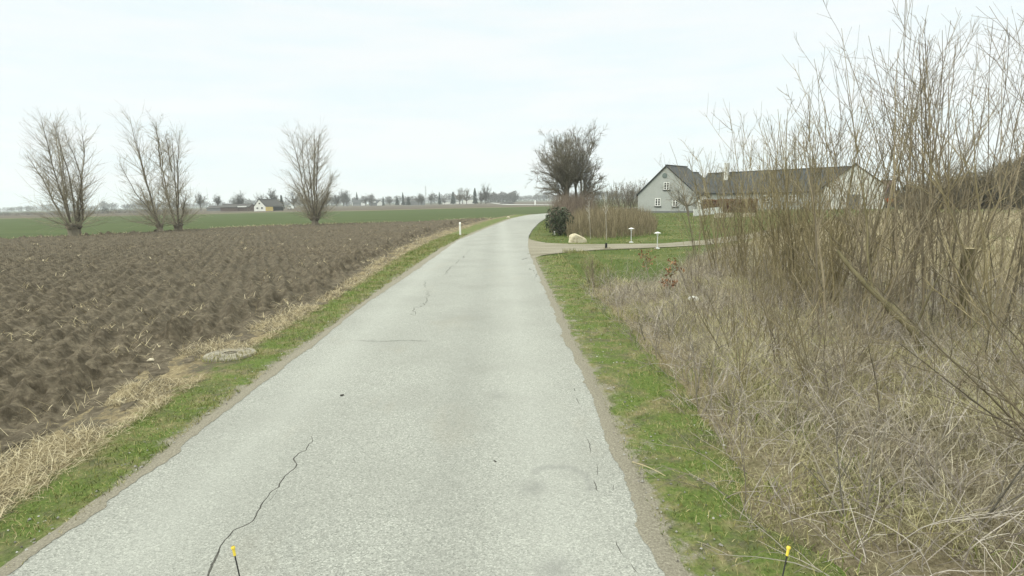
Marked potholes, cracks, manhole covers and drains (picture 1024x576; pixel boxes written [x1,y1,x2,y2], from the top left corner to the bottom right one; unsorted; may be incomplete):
crack [207,436,313,576]
